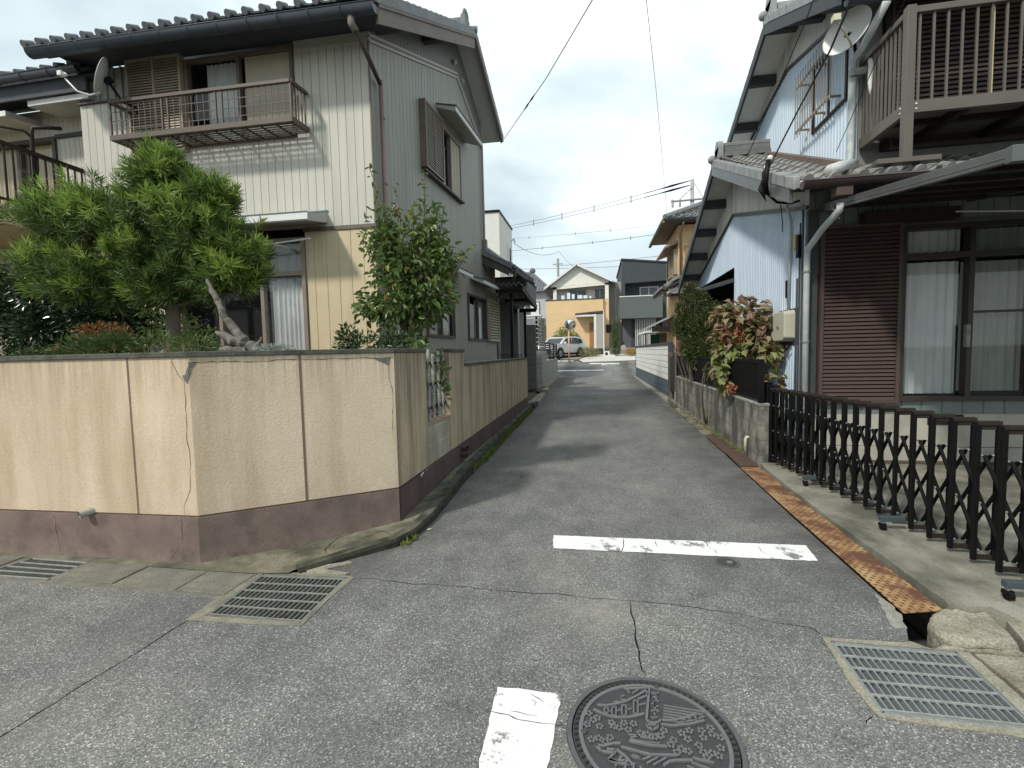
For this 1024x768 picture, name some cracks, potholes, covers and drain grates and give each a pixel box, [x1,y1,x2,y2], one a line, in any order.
drain grate [0,557,89,581]
drain grate [206,574,346,623]
drain grate [832,641,1024,729]
crack [363,578,822,676]
manhole cover [567,677,749,768]
manhole cover [713,557,740,568]
